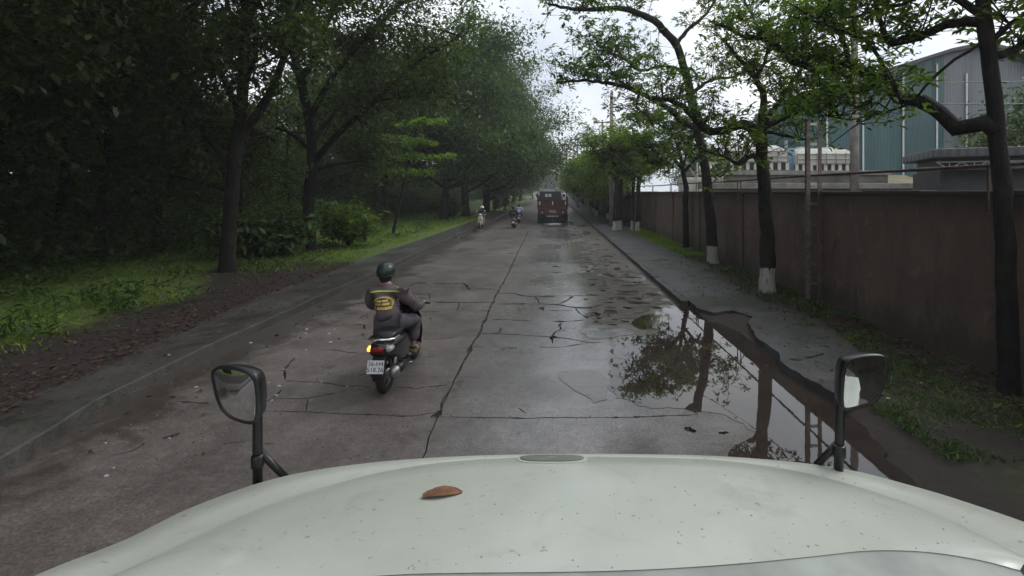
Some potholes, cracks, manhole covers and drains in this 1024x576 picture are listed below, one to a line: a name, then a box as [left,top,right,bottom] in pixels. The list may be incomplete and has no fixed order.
crack [401,276,472,321]
crack [267,358,371,411]
